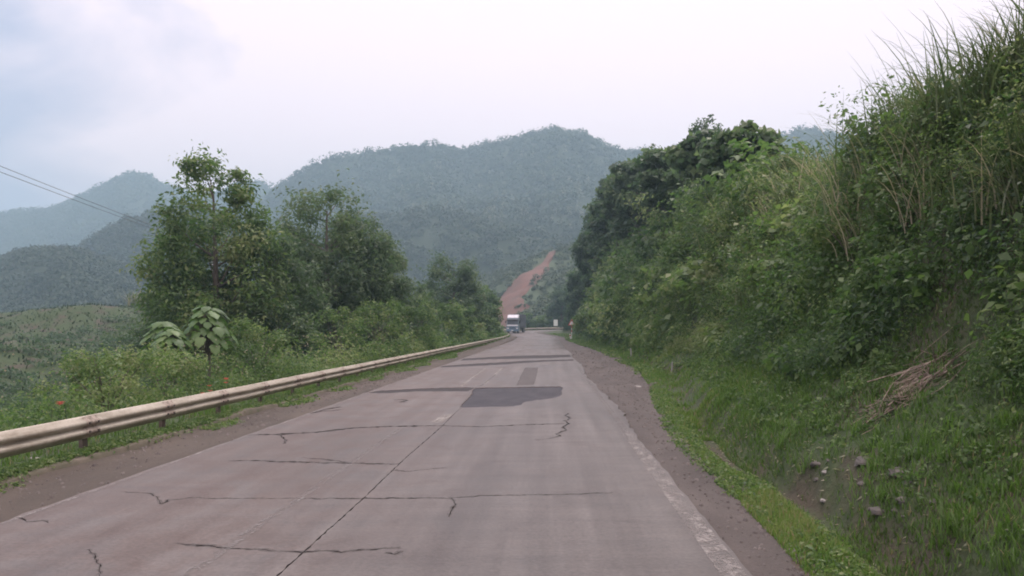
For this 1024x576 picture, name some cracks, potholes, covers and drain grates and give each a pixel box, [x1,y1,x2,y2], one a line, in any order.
crack [164,492,598,516]
crack [87,549,102,576]
crack [235,407,571,472]
crack [176,542,403,555]
